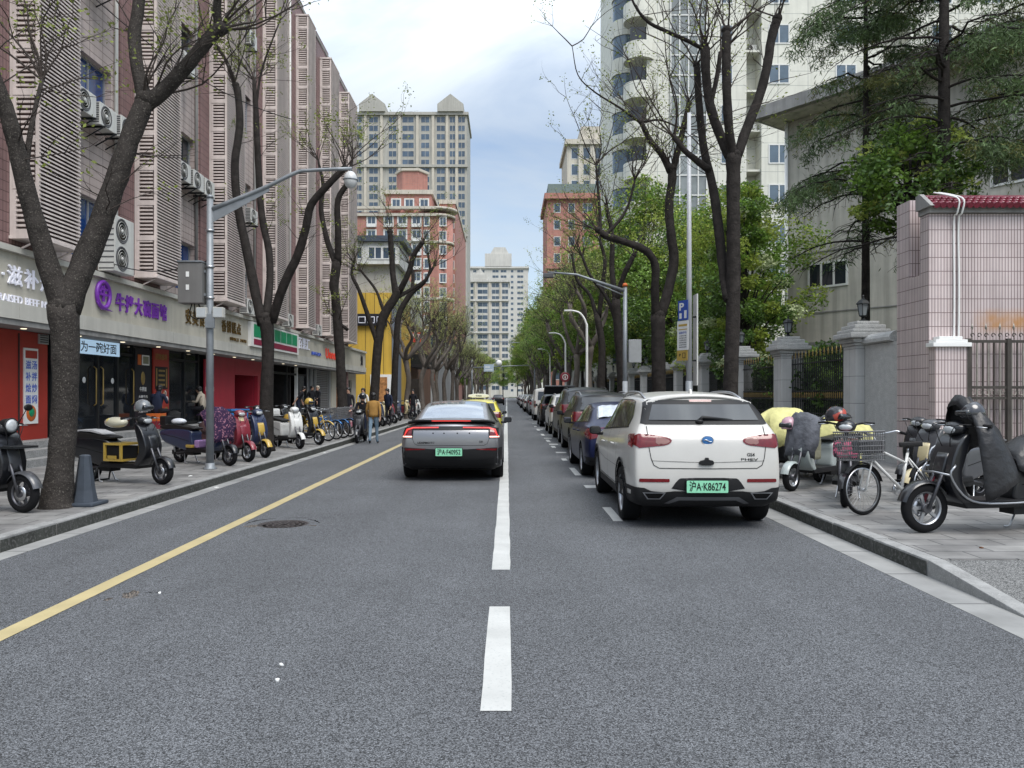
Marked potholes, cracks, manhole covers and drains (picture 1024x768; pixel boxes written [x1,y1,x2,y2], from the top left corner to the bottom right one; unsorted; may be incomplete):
manhole cover [257,520,309,528]
